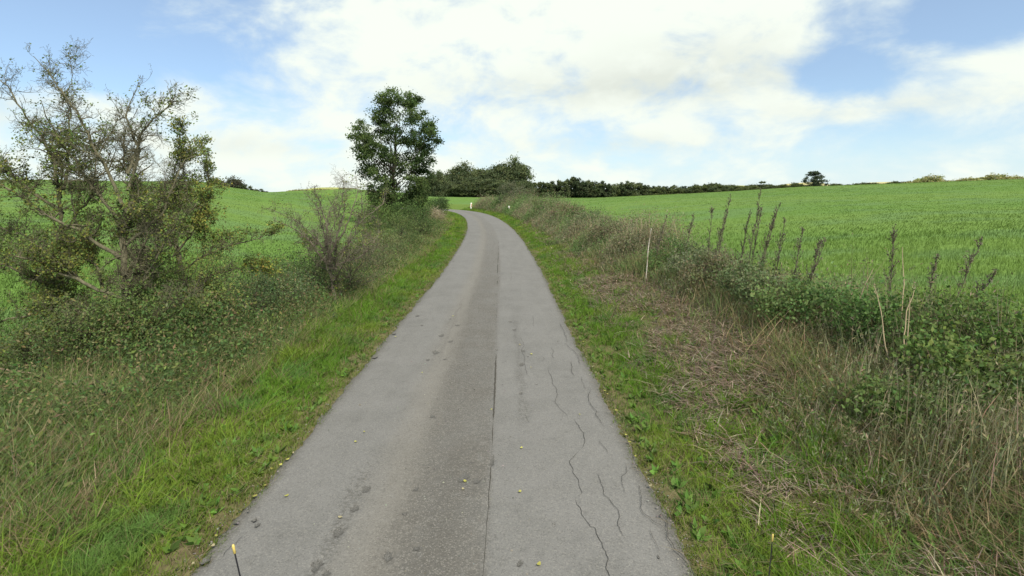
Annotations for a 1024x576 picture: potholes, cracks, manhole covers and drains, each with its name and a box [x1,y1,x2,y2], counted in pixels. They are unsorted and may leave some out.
crack [550,323,694,576]
